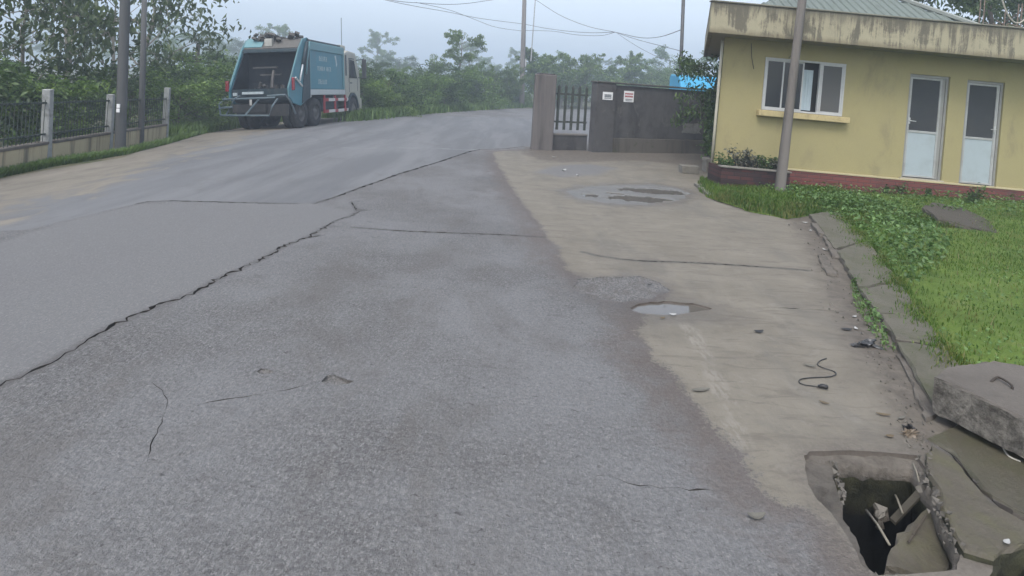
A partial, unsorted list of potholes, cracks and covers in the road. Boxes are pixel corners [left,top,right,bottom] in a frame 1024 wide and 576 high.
pothole [566,185,691,205]
pothole [804,450,960,575]
crack [146,381,320,465]
pothole [630,301,712,315]
crack [369,228,535,237]
crack [0,203,360,386]
pothole [322,375,353,385]
crack [598,475,733,493]
